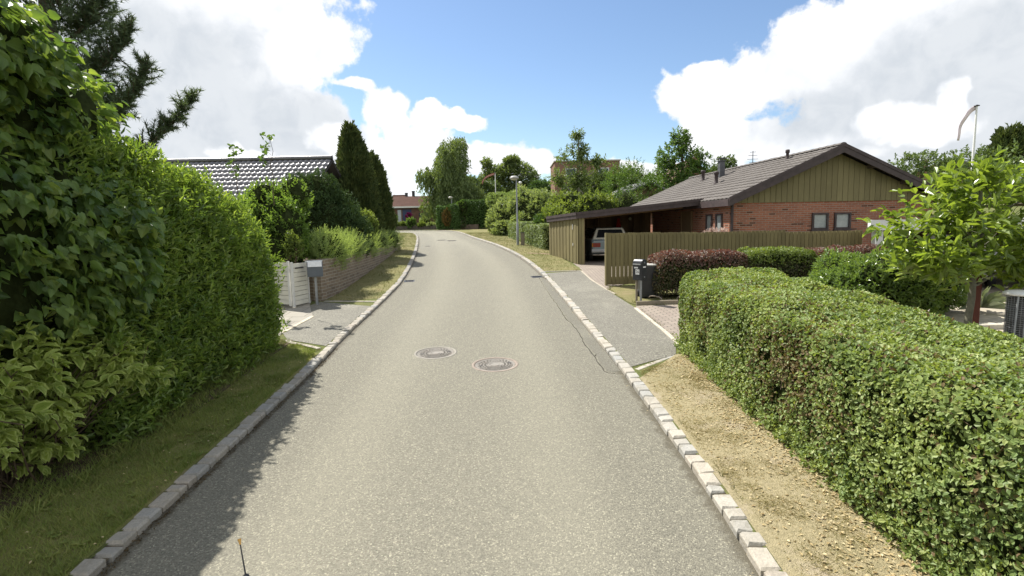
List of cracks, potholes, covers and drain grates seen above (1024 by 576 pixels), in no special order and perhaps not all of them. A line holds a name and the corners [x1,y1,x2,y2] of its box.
manhole cover [472,357,519,372]
crack [572,264,615,374]
manhole cover [414,347,457,359]
